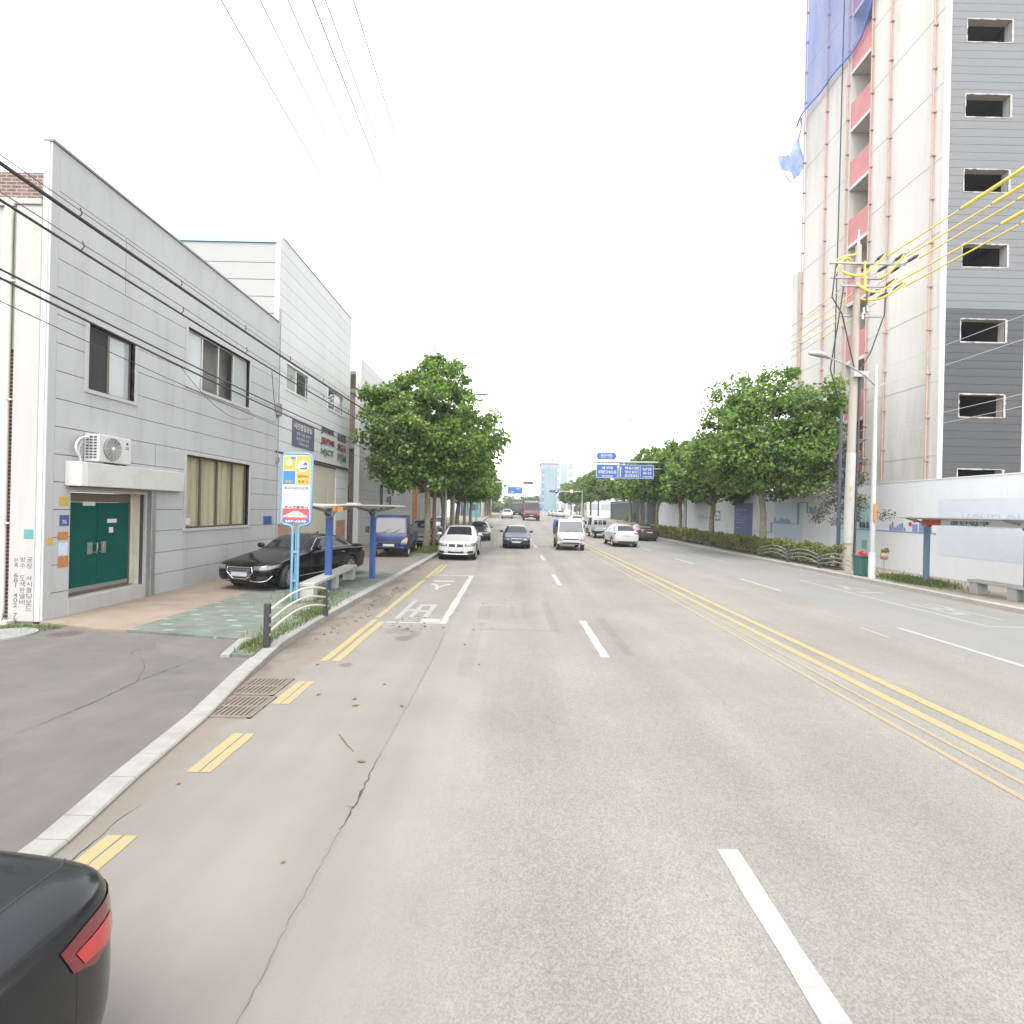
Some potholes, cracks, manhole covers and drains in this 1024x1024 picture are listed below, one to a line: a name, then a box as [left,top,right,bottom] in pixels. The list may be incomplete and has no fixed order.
drain grate [232,677,295,696]
crack [72,804,141,860]
crack [15,643,202,734]
drain grate [209,695,277,719]
manhole cover [45,630,84,638]
